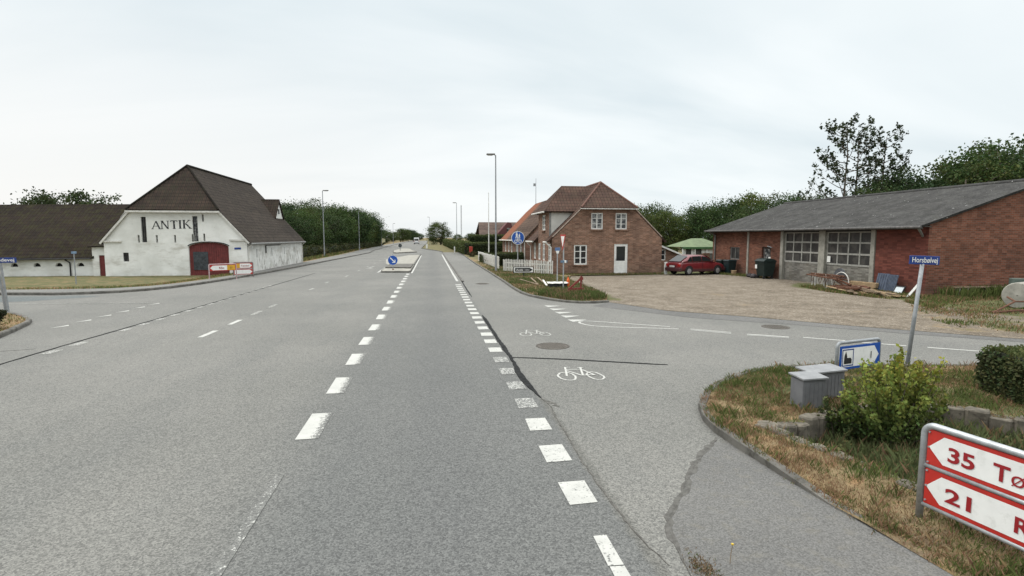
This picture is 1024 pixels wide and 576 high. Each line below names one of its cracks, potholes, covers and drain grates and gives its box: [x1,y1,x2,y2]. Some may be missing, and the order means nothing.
manhole cover [536,342,570,350]
crack [663,437,717,576]
